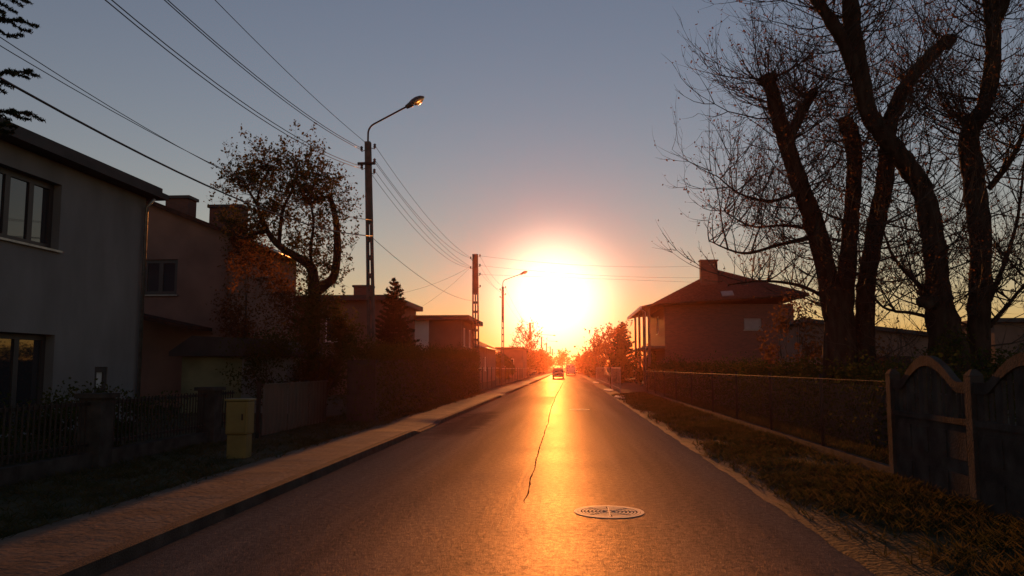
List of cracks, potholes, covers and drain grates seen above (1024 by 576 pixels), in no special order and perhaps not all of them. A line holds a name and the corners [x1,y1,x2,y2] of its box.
crack [524,383,563,503]
manhole cover [574,505,644,518]
